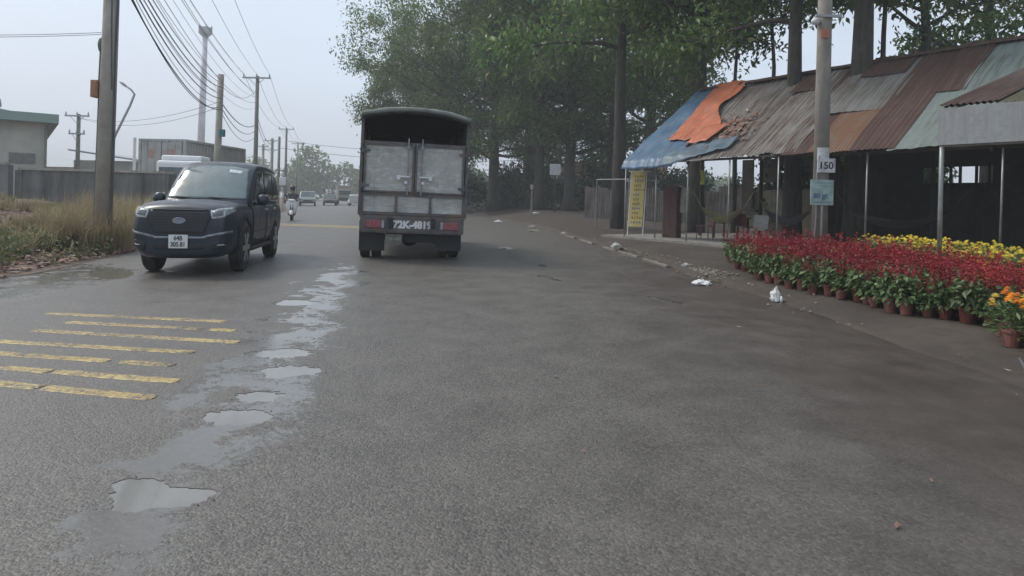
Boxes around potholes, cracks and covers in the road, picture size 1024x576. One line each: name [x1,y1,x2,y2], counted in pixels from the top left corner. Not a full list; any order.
pothole [231,391,286,403]
pothole [244,346,313,359]
pothole [260,365,326,379]
pothole [203,406,274,426]
pothole [108,476,224,513]
